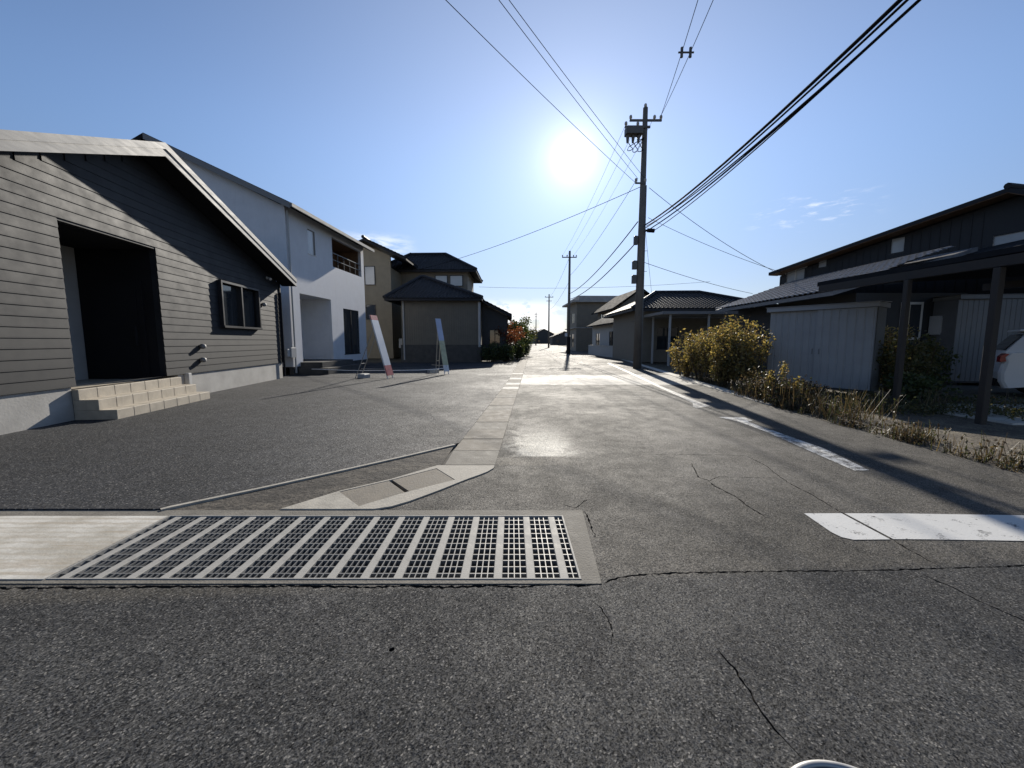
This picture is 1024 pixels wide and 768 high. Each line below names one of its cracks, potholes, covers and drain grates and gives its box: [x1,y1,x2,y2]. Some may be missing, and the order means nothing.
crack [717,648,802,758]
crack [652,454,1024,621]
drain grate [46,515,582,580]
